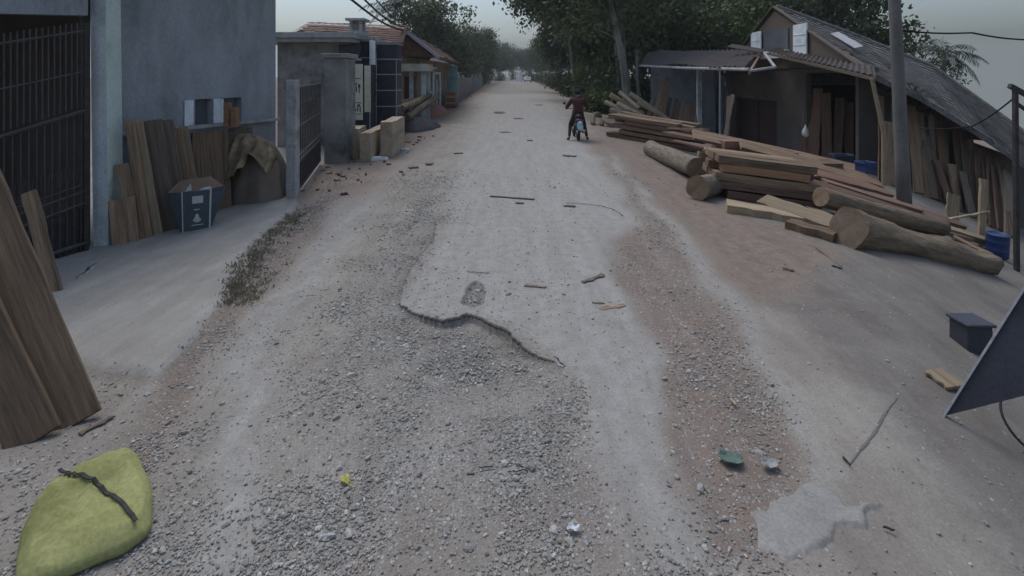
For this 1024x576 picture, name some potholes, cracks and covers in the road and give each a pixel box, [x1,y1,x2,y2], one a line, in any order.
crack [76,263,98,279]
